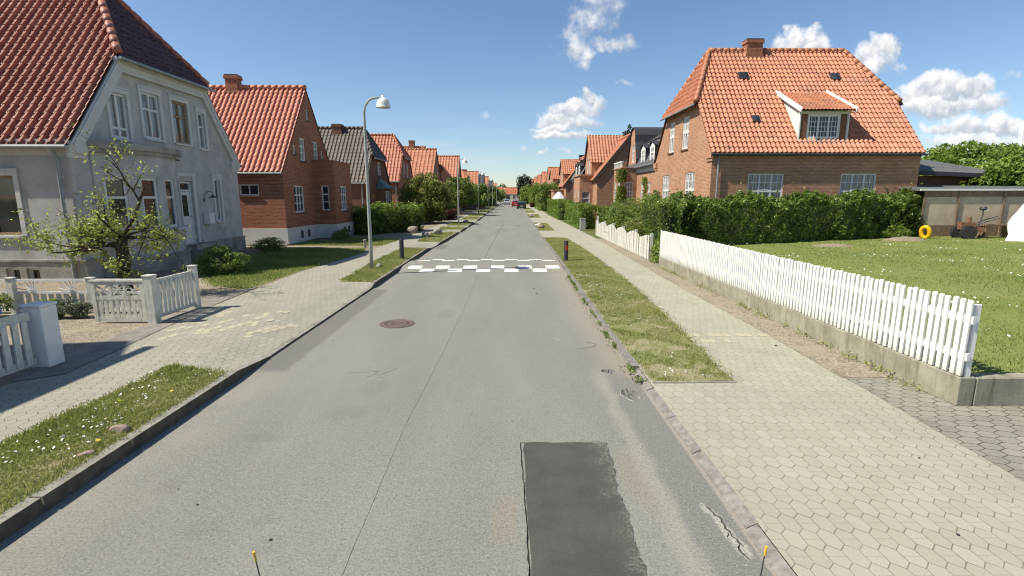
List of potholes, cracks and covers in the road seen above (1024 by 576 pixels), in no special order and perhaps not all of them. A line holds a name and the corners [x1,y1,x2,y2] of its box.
crack [705,505,750,560]
pothole [620,388,640,401]
manhole cover [379,319,415,328]
